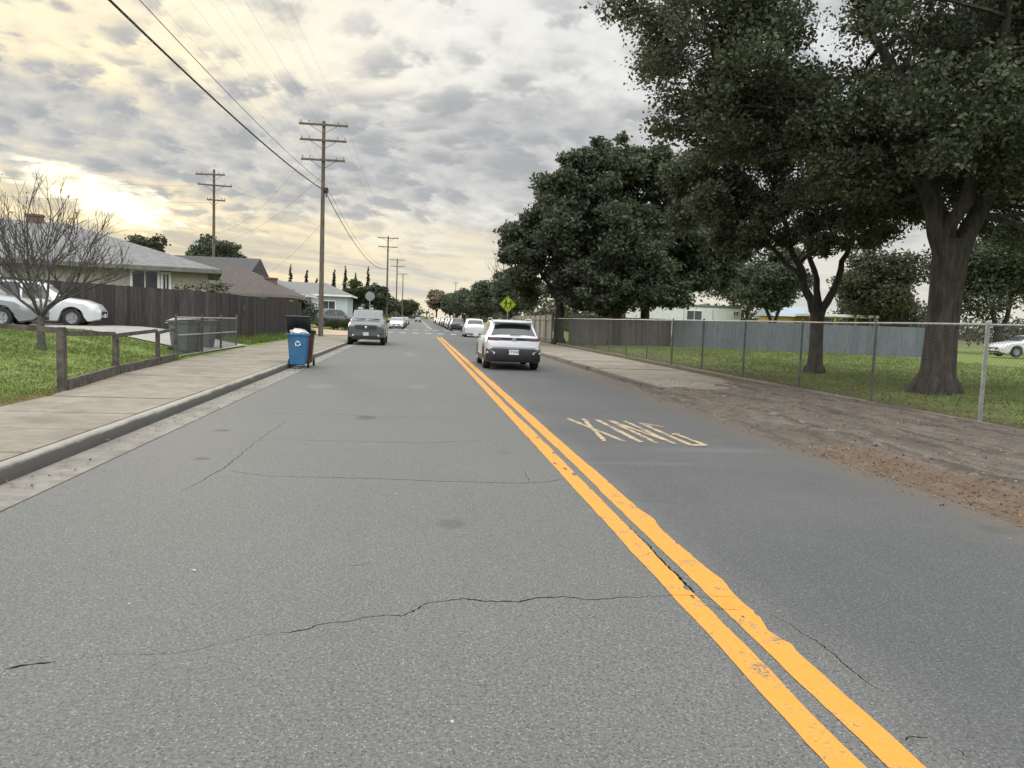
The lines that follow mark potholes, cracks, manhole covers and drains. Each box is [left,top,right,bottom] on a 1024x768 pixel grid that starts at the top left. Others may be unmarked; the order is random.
crack [182,412,561,491]
crack [6,526,748,669]
crack [771,614,965,756]
